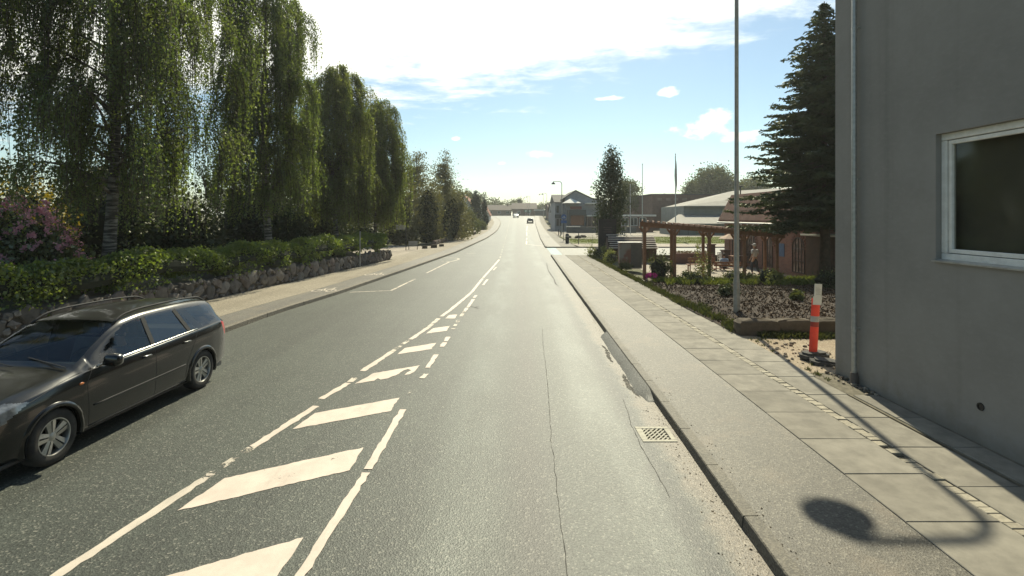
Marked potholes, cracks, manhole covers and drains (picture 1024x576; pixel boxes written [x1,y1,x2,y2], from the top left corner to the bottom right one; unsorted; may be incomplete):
drain grate [635,427,678,442]
